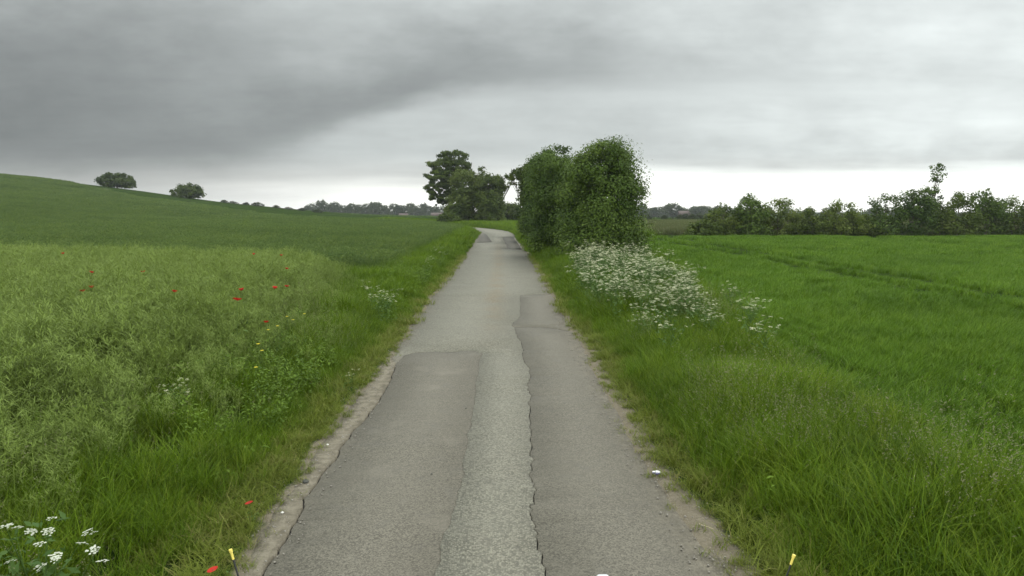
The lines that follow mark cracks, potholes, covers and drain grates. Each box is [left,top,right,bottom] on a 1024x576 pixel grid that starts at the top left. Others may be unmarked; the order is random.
crack [521,343,546,576]
